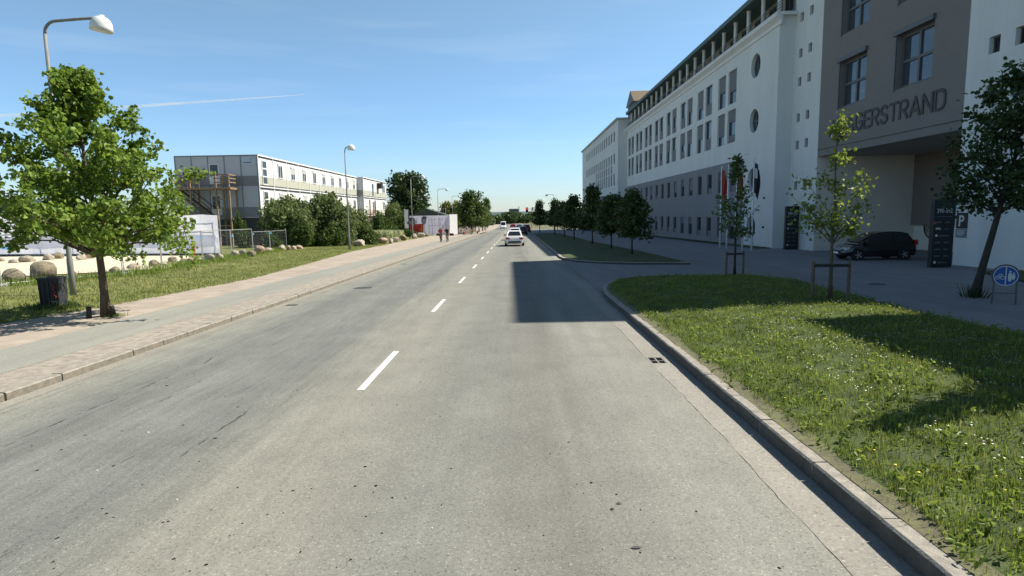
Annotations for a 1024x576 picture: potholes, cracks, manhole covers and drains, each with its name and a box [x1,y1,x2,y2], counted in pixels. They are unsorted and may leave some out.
crack [180,411,248,457]
crack [3,358,212,447]
